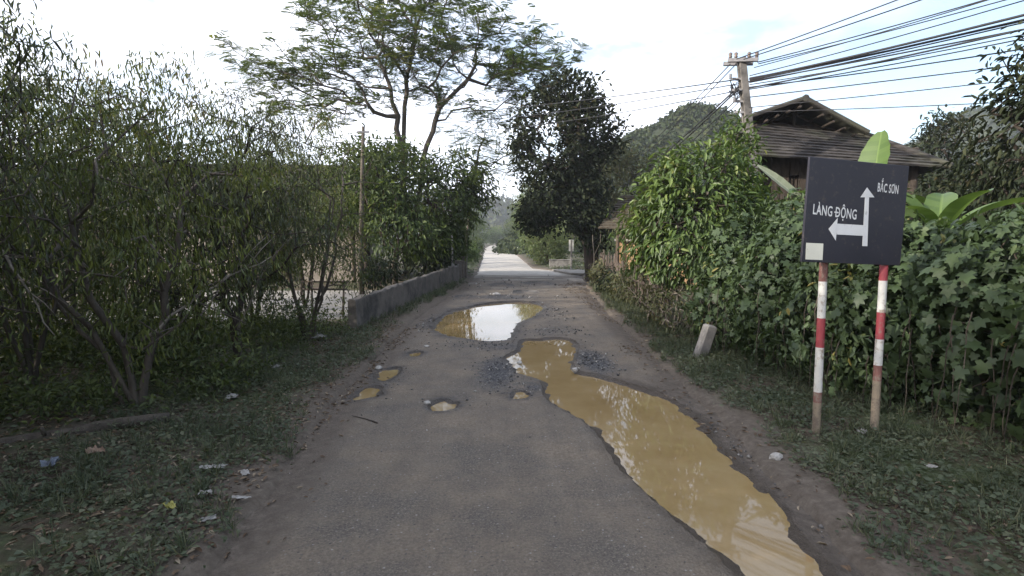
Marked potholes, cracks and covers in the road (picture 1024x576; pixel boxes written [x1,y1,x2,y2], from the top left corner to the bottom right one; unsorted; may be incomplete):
pothole [350,385,384,400]
pothole [427,398,461,411]
pothole [500,337,836,576]
pothole [429,300,547,341]
pothole [372,366,403,381]
